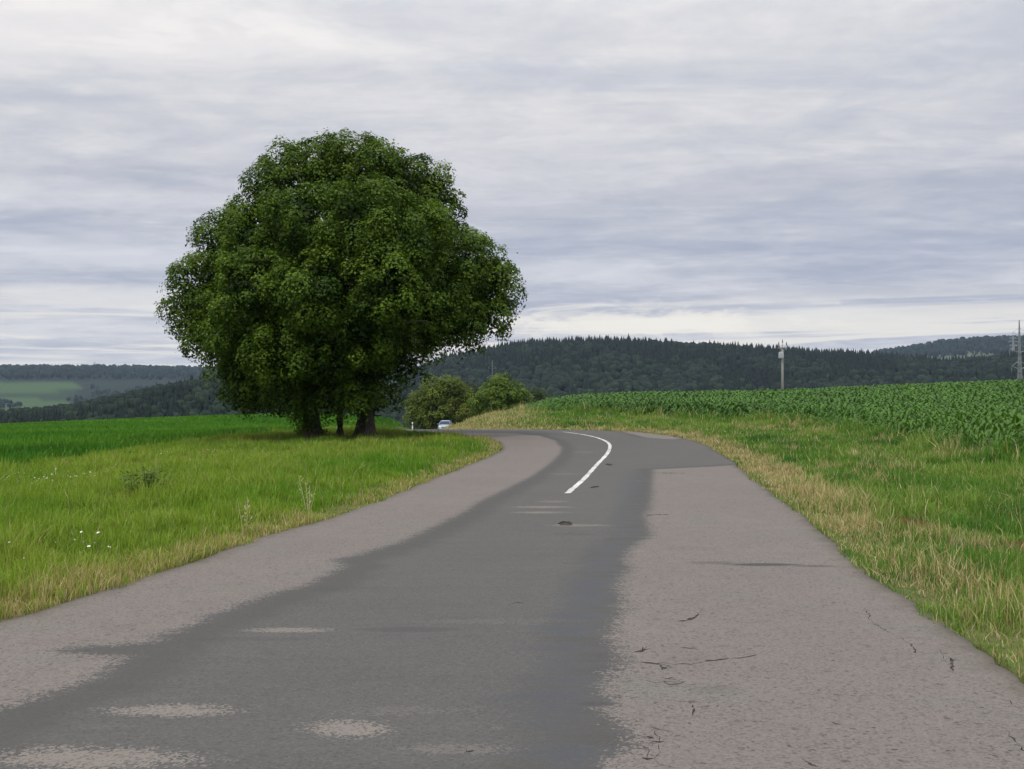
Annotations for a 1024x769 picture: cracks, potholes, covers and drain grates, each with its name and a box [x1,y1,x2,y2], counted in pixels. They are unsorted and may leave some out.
crack [633,647,755,715]
crack [642,725,671,765]
